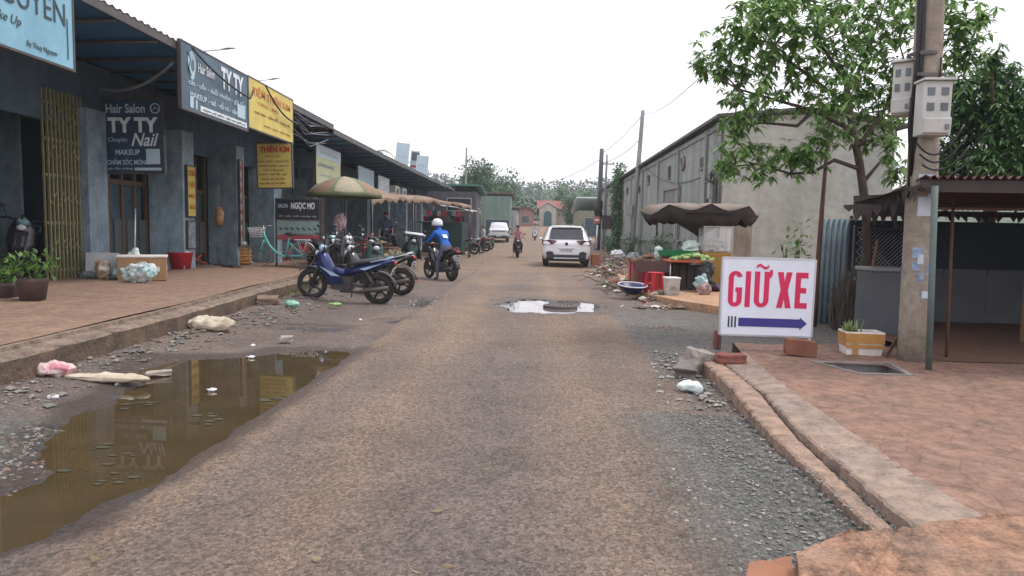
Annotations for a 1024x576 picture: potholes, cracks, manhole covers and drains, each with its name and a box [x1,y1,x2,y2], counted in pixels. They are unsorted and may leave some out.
pothole [493,299,603,314]
